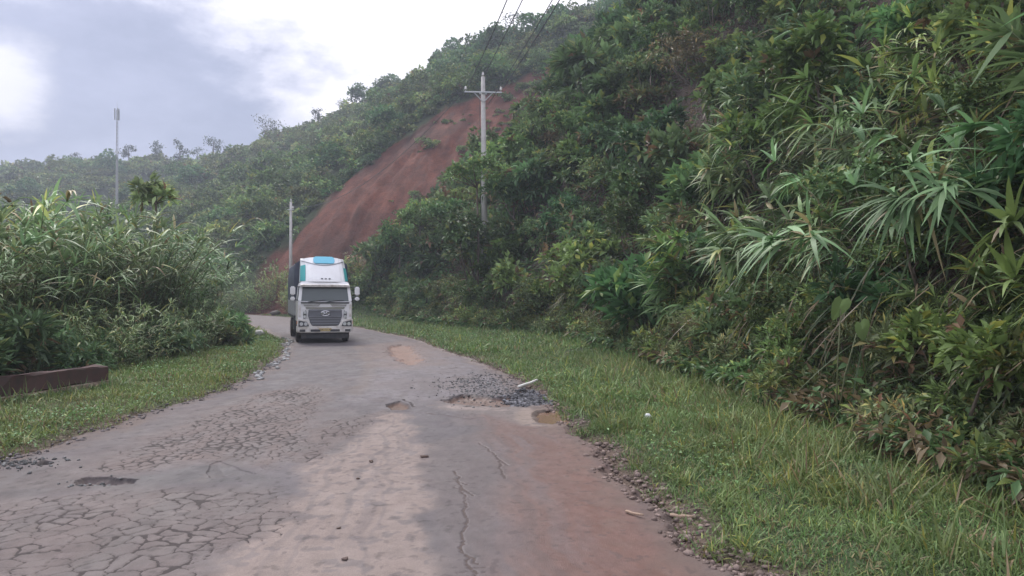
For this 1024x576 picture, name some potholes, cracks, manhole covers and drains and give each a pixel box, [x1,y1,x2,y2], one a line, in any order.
pothole [531,409,569,425]
crack [479,443,507,479]
pothole [385,401,411,410]
pothole [440,387,550,407]
crack [0,491,295,576]
crack [90,388,373,472]
crack [453,471,485,576]
pothole [74,477,139,489]
